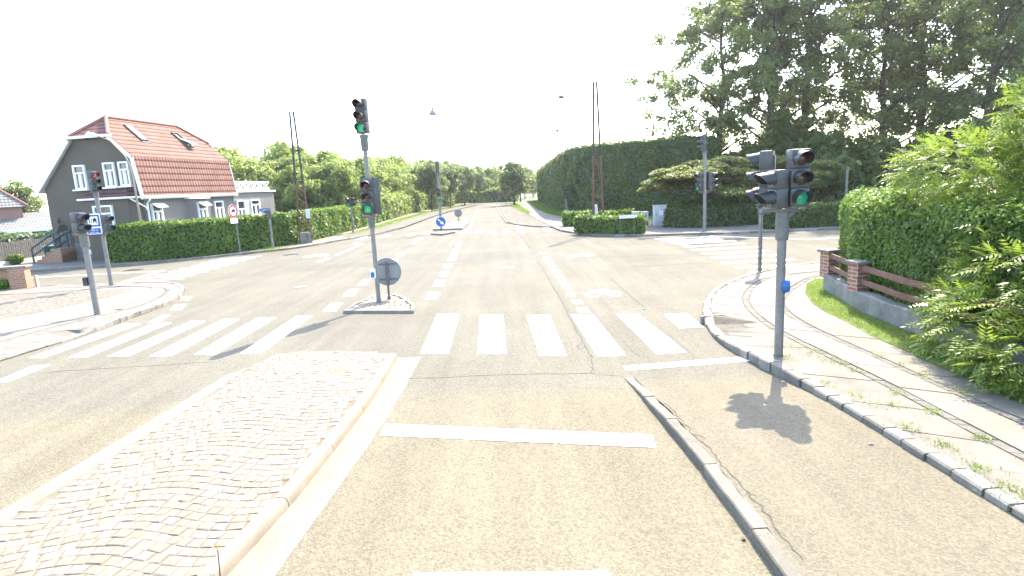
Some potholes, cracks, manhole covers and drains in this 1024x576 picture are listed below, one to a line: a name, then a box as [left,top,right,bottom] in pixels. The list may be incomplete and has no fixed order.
crack [663,402,804,561]
